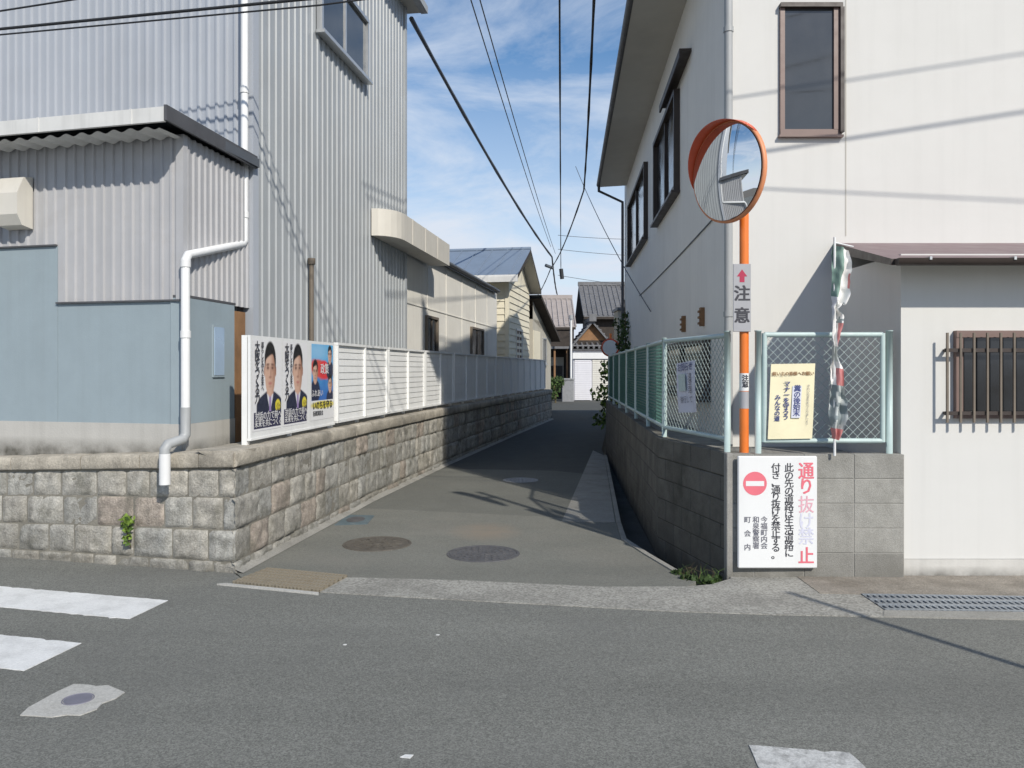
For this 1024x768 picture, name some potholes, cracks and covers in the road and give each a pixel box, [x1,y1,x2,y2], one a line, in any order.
manhole cover [335,515,374,525]
manhole cover [342,536,412,552]
manhole cover [446,545,520,562]
drain grate [861,593,1024,612]
manhole cover [61,693,95,705]
